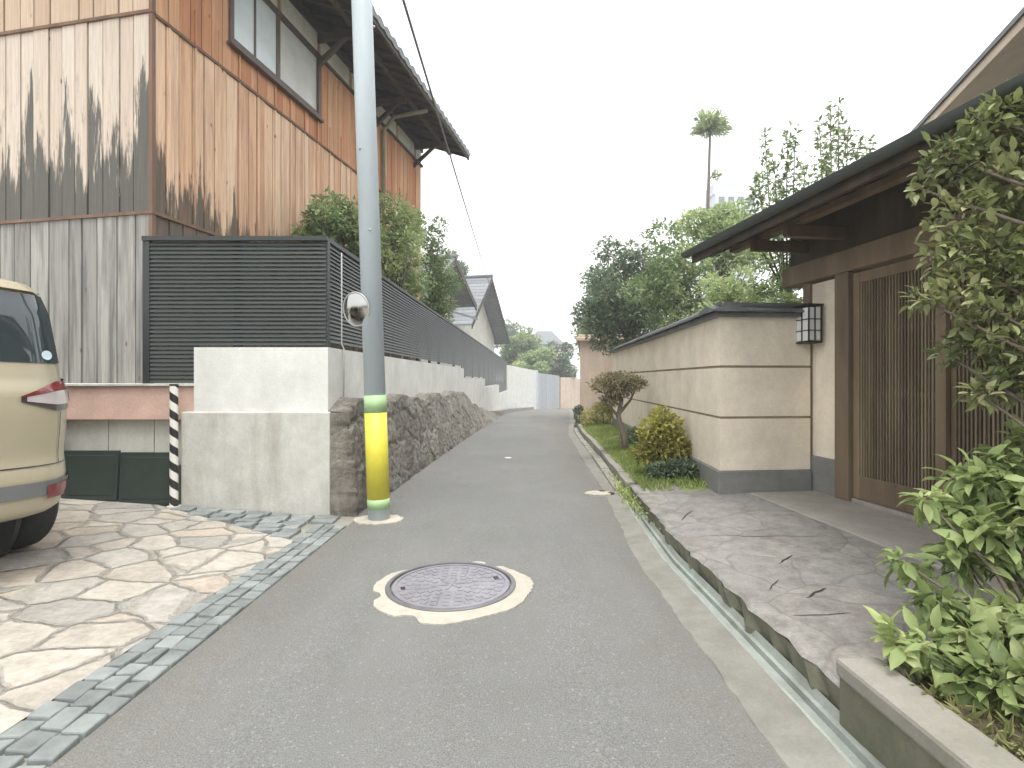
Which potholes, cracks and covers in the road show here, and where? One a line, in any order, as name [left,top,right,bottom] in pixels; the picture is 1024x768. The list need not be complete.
crack [807,588,851,615]
manhole cover [373,561,534,625]
